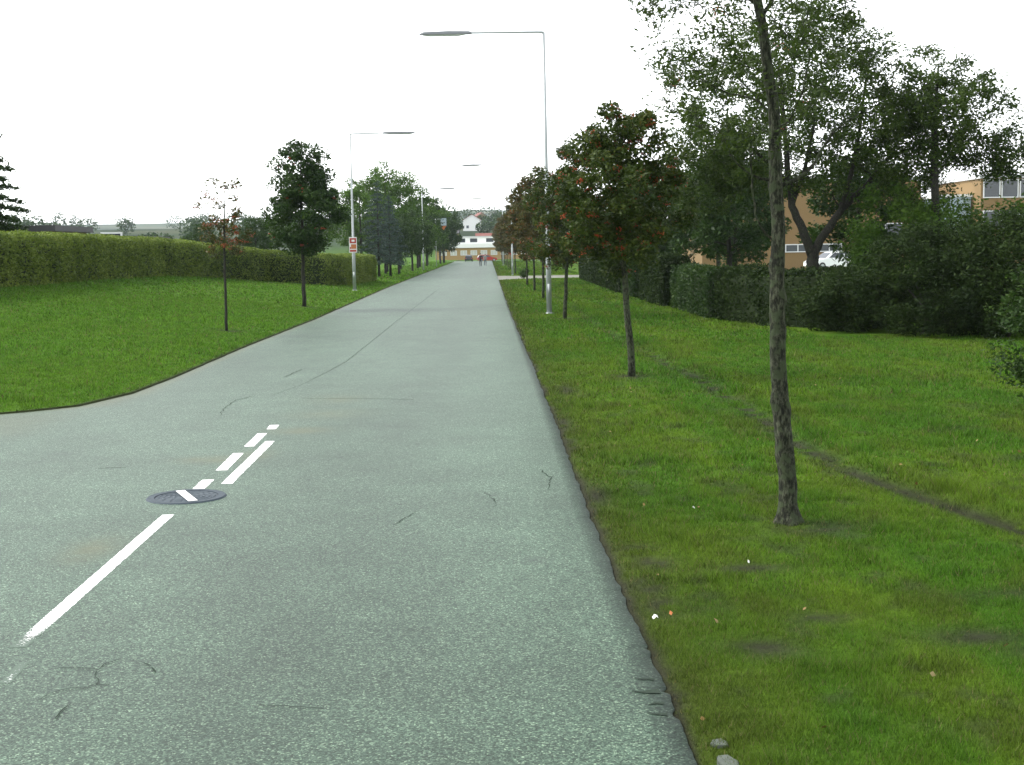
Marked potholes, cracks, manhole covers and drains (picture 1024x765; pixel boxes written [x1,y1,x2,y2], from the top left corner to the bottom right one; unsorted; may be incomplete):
crack [632,677,668,716]
crack [42,660,115,718]
manhole cover [146,489,227,505]
